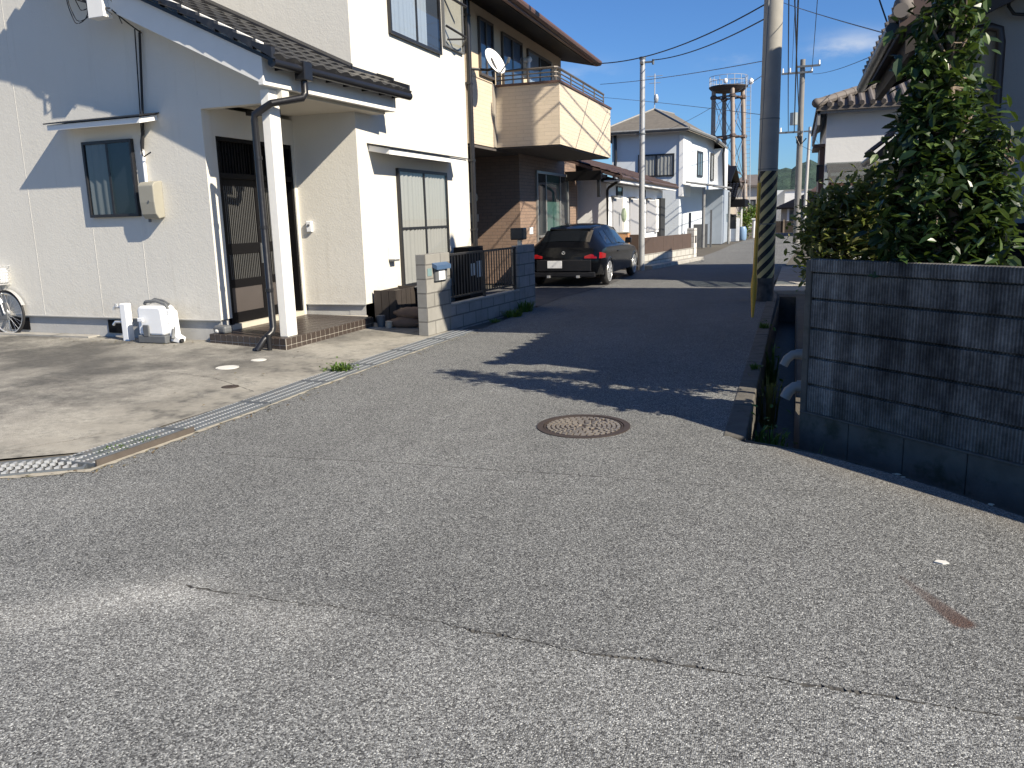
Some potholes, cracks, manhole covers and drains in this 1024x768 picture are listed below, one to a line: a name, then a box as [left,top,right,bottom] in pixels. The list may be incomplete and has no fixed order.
drain grate [57,427,195,469]
drain grate [351,350,414,365]
crack [186,585,1024,720]
drain grate [301,364,375,382]
drain grate [242,380,328,404]
drain grate [163,401,270,431]
drain grate [0,453,95,477]
manhole cover [537,414,631,439]
